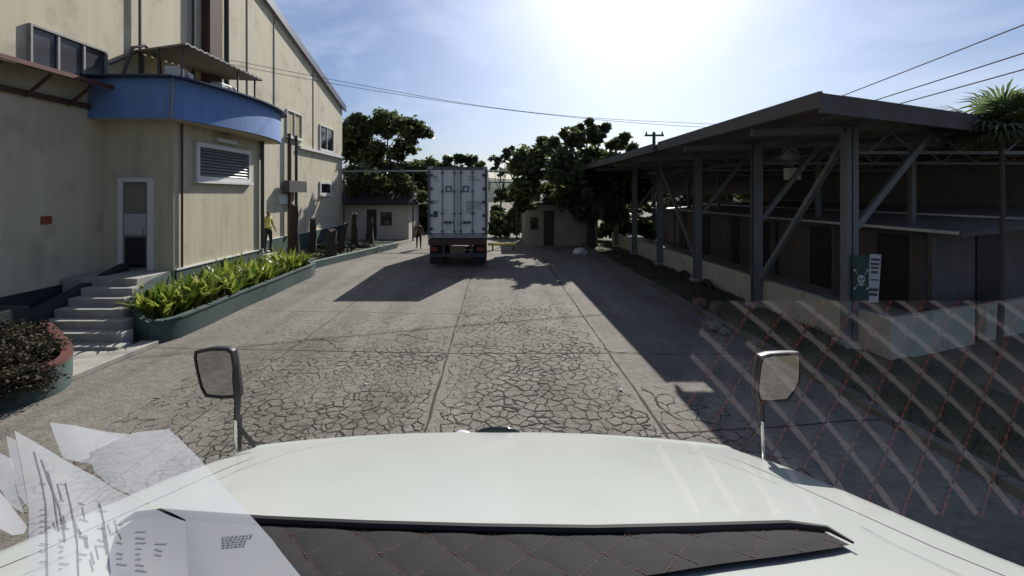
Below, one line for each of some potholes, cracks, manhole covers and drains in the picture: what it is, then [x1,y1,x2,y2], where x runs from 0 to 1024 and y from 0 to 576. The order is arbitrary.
crack [17,289,841,536]
